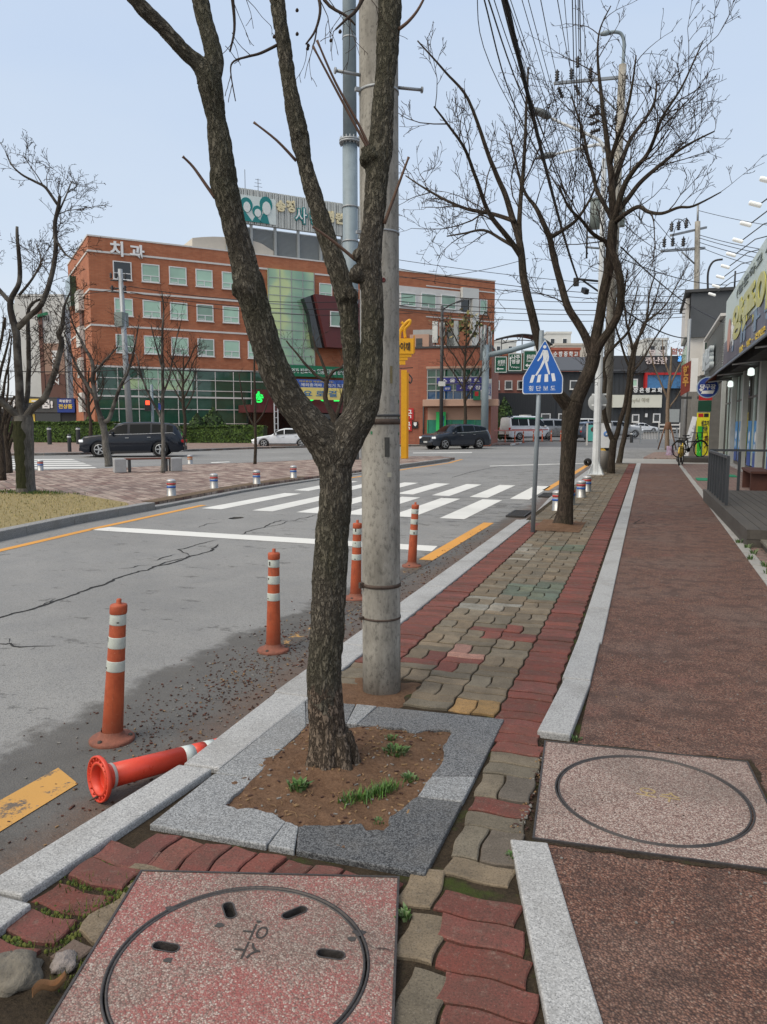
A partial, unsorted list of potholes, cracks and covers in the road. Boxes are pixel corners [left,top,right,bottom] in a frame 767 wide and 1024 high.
crack [0,522,219,618]
manhole cover [45,869,400,1024]
manhole cover [532,740,767,872]
drain grate [506,510,531,518]
